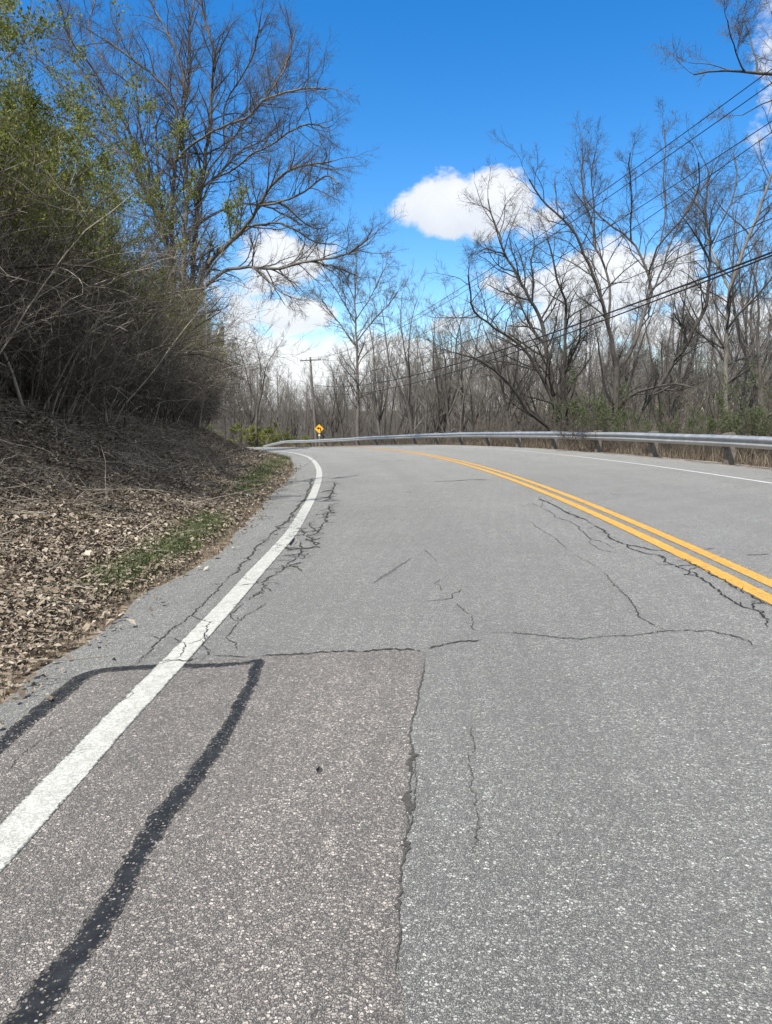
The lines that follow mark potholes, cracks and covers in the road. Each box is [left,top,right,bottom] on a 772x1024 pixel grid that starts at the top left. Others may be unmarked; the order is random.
crack [251,497,772,1017]
crack [135,478,342,665]
